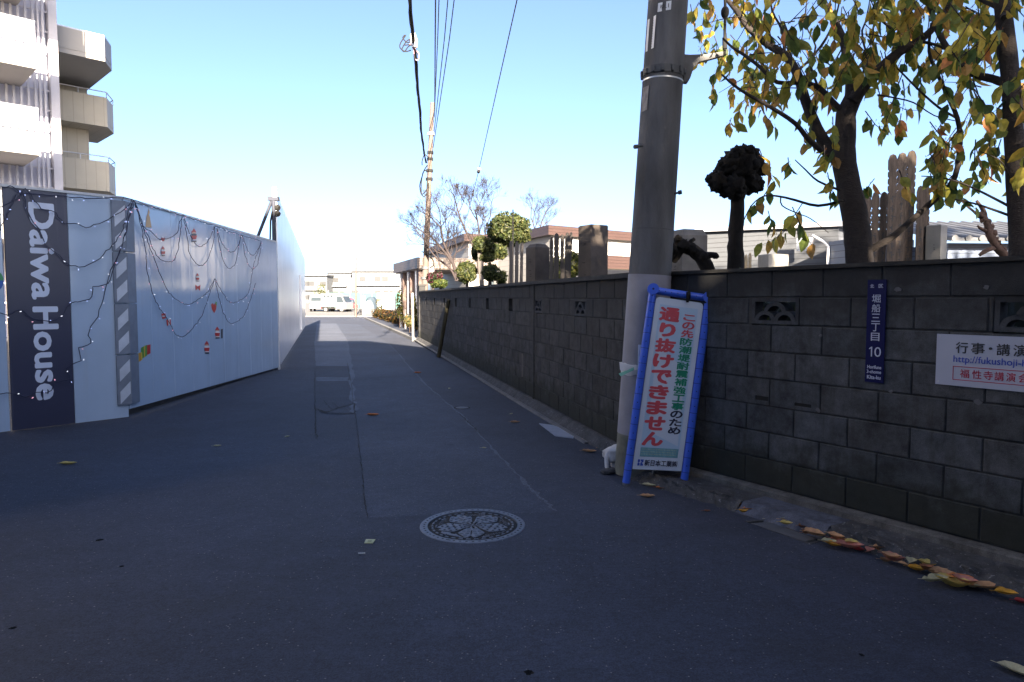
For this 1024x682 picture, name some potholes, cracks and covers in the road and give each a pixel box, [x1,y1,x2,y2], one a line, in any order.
manhole cover [420,509,525,544]
